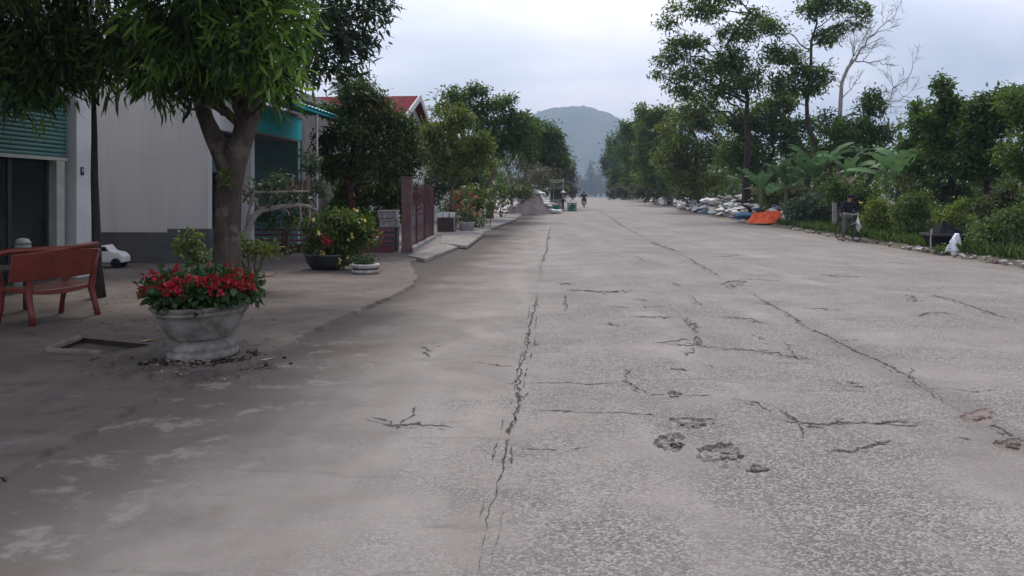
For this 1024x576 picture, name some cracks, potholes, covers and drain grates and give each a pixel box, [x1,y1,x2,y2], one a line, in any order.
pothole [745,464,770,473]
pothole [992,437,1024,452]
pothole [653,432,686,453]
pothole [959,408,996,426]
crack [368,407,452,431]
crack [598,210,738,277]
crack [523,226,813,371]
crack [737,399,931,452]
pothole [696,442,745,470]
